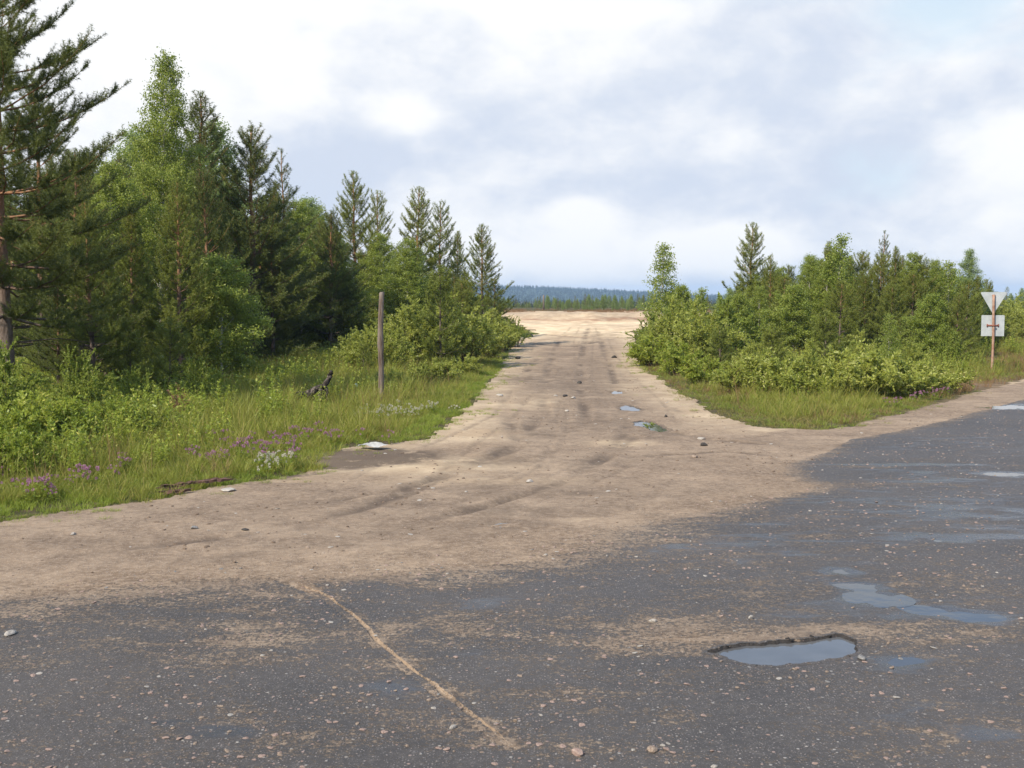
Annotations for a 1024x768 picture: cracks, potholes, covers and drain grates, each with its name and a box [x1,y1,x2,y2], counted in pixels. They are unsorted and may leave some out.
pothole [701,632,864,668]
pothole [627,420,673,433]
crack [289,581,514,743]
